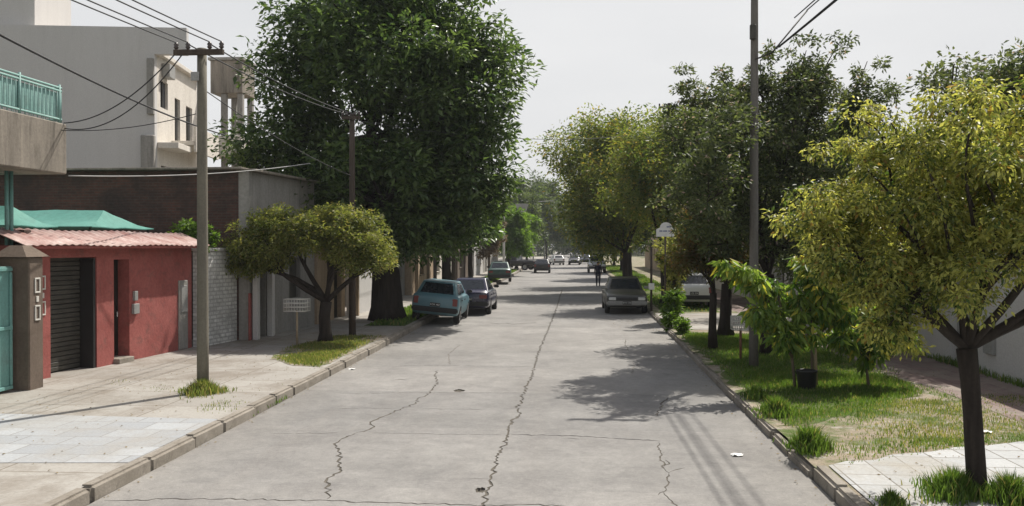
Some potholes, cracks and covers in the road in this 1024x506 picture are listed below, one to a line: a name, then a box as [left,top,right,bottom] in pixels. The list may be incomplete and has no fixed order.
crack [105,292,682,506]
